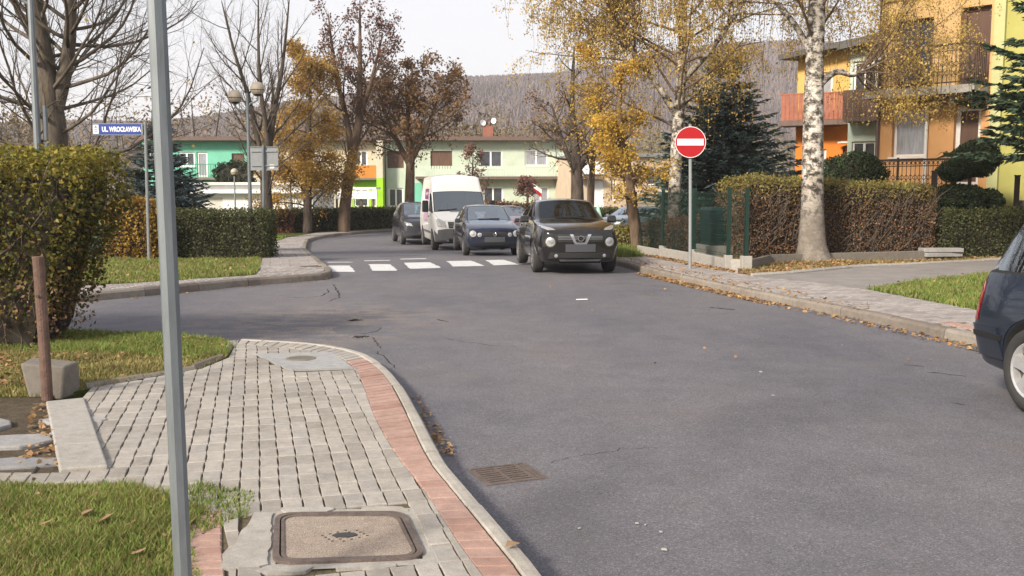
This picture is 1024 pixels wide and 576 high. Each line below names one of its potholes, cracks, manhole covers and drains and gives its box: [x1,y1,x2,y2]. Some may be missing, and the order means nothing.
manhole cover [255,352,353,371]
drain grate [466,462,548,486]
manhole cover [272,511,423,565]
